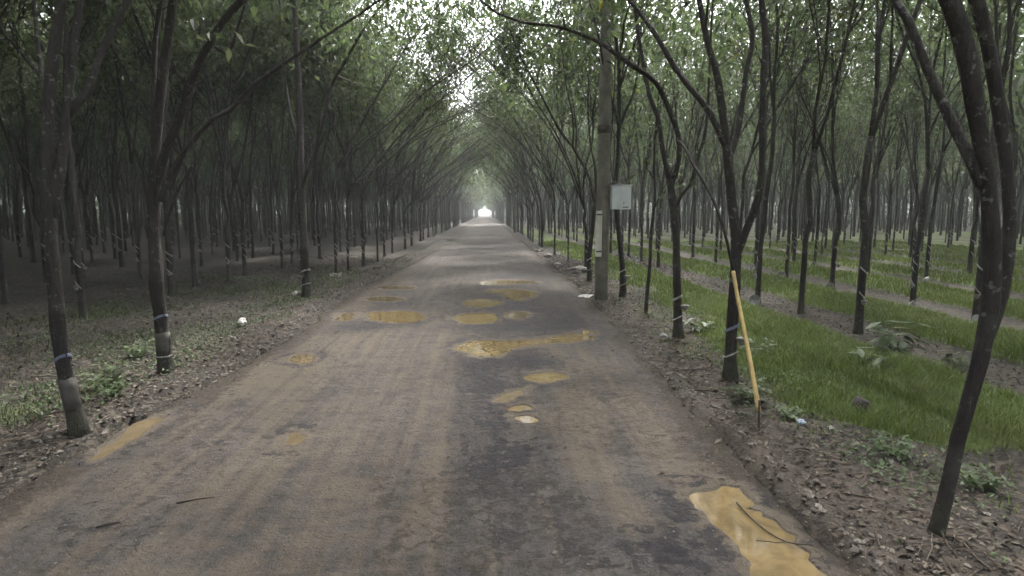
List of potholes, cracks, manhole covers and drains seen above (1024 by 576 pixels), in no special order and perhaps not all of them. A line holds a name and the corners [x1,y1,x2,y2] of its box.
pothole [283,431,308,445]
pothole [485,289,539,301]
pothole [511,413,540,423]
pothole [450,313,500,324]
pothole [87,414,168,460]
pothole [684,483,835,576]
pothole [523,371,571,383]
pothole [503,311,531,319]
pothole [492,387,531,403]
pothole [462,299,503,308]
pothole [506,403,533,412]
pothole [334,312,361,321]
